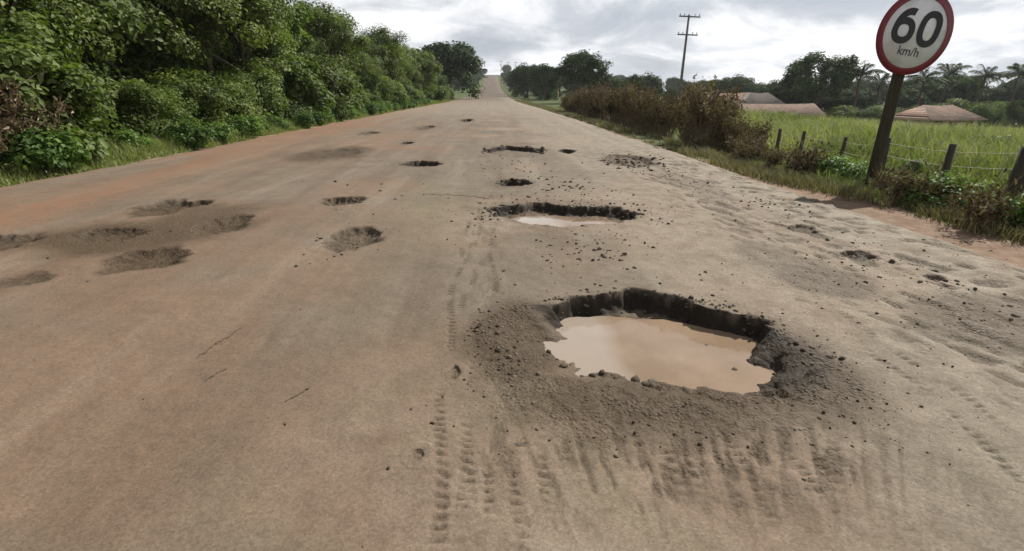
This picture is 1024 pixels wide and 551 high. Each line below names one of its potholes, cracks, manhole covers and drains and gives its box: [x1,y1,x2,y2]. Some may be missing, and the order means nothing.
pothole [163,211,275,242]
pothole [305,194,381,209]
pothole [391,159,451,168]
pothole [94,197,230,223]
pothole [474,201,651,234]
pothole [47,224,160,247]
crack [196,327,243,382]
pothole [302,223,397,256]
pothole [74,240,220,282]
pothole [489,178,541,188]
pothole [588,153,674,170]
